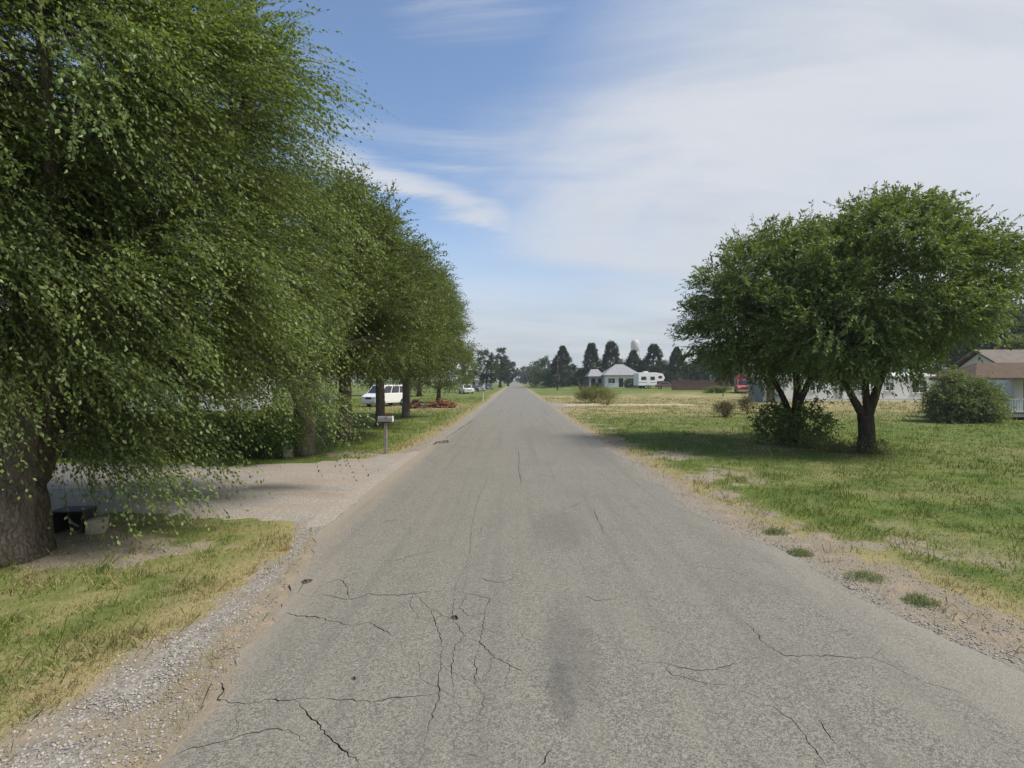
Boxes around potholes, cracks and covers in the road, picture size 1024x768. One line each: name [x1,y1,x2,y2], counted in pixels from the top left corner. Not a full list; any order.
crack [297,573,445,600]
crack [647,661,740,685]
crack [762,704,864,764]
crack [176,580,528,766]
crack [747,623,956,692]
